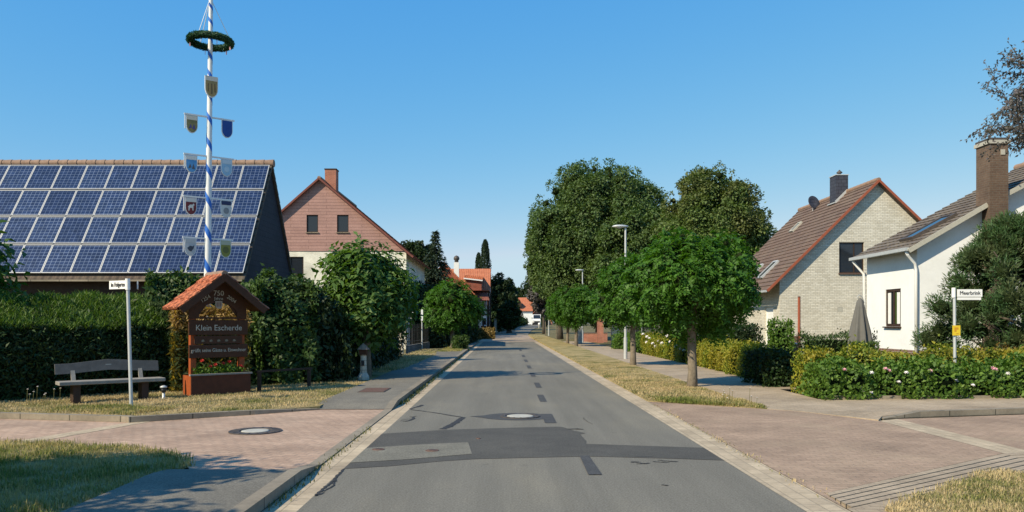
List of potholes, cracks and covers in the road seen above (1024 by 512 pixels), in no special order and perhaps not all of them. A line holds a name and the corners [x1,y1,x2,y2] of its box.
manhole cover [228,427,282,435]
